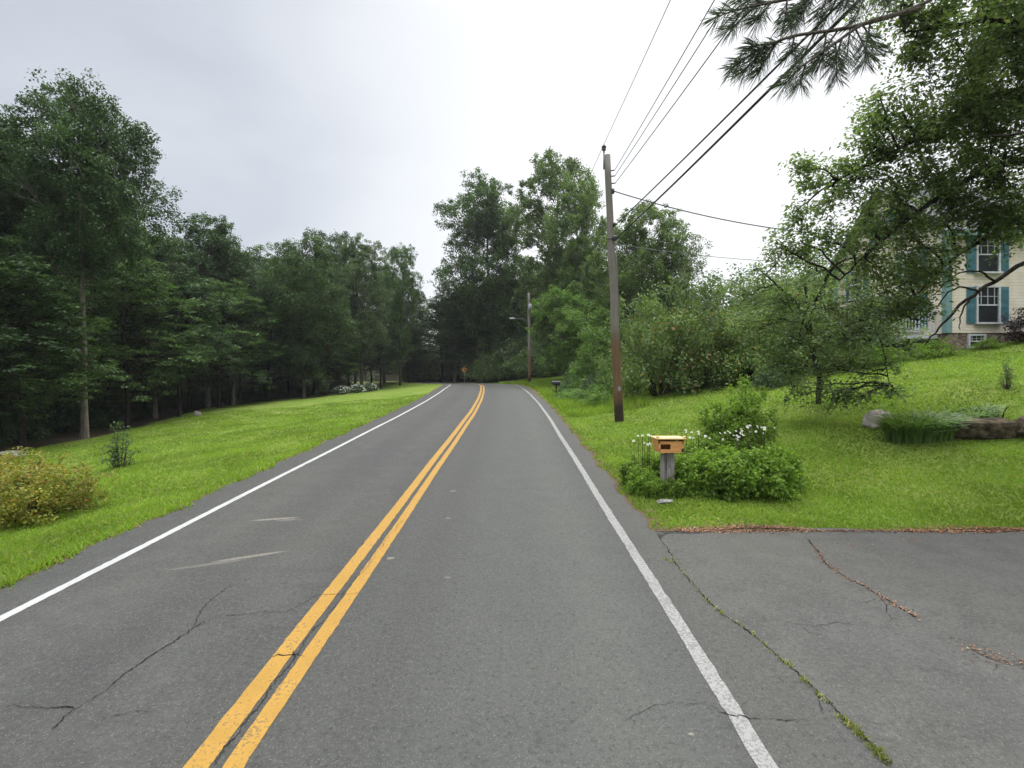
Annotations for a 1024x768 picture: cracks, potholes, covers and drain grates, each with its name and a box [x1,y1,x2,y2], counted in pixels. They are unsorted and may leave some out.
crack [794,538,1024,670]
crack [7,589,352,728]
crack [626,702,805,722]
